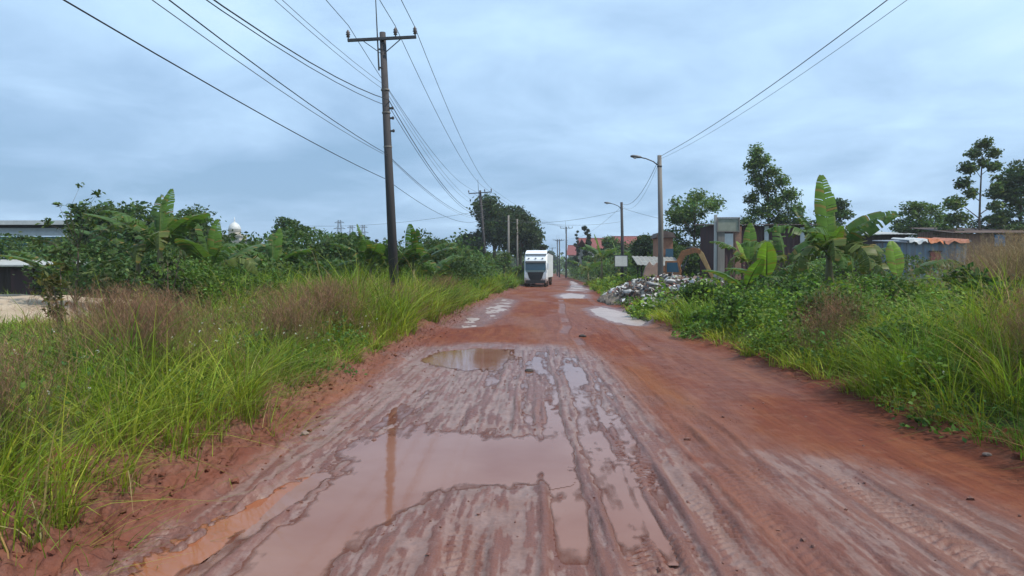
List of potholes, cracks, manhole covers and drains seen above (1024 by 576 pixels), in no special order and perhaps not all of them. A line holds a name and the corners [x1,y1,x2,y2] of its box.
pothole [177,425,585,576]
pothole [584,306,653,326]
pothole [405,344,524,373]
